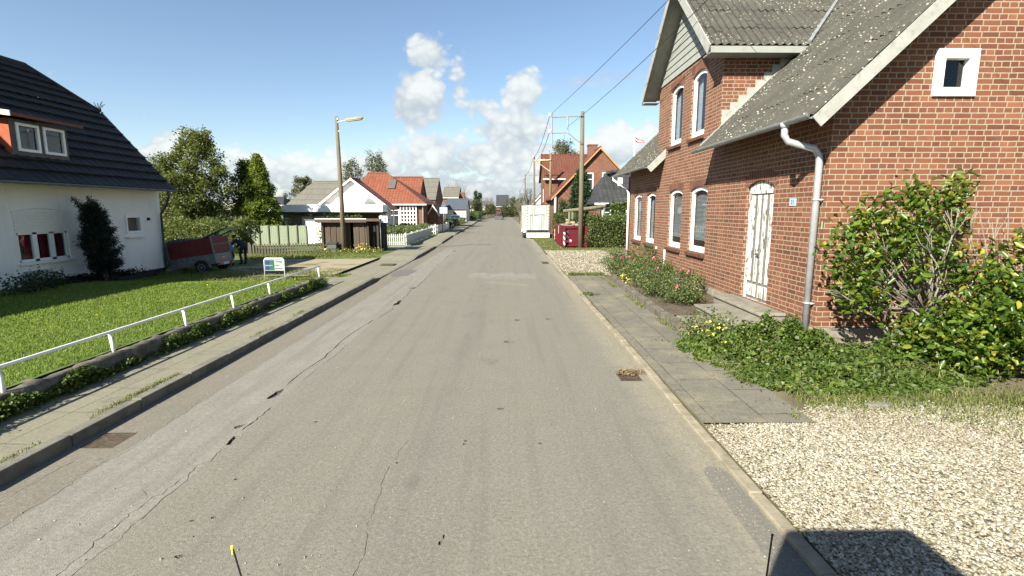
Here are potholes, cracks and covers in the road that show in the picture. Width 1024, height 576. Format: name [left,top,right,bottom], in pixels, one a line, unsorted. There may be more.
drain grate [80,433,137,448]
crack [353,442,407,576]
drain grate [616,373,643,381]
crack [56,446,225,576]
